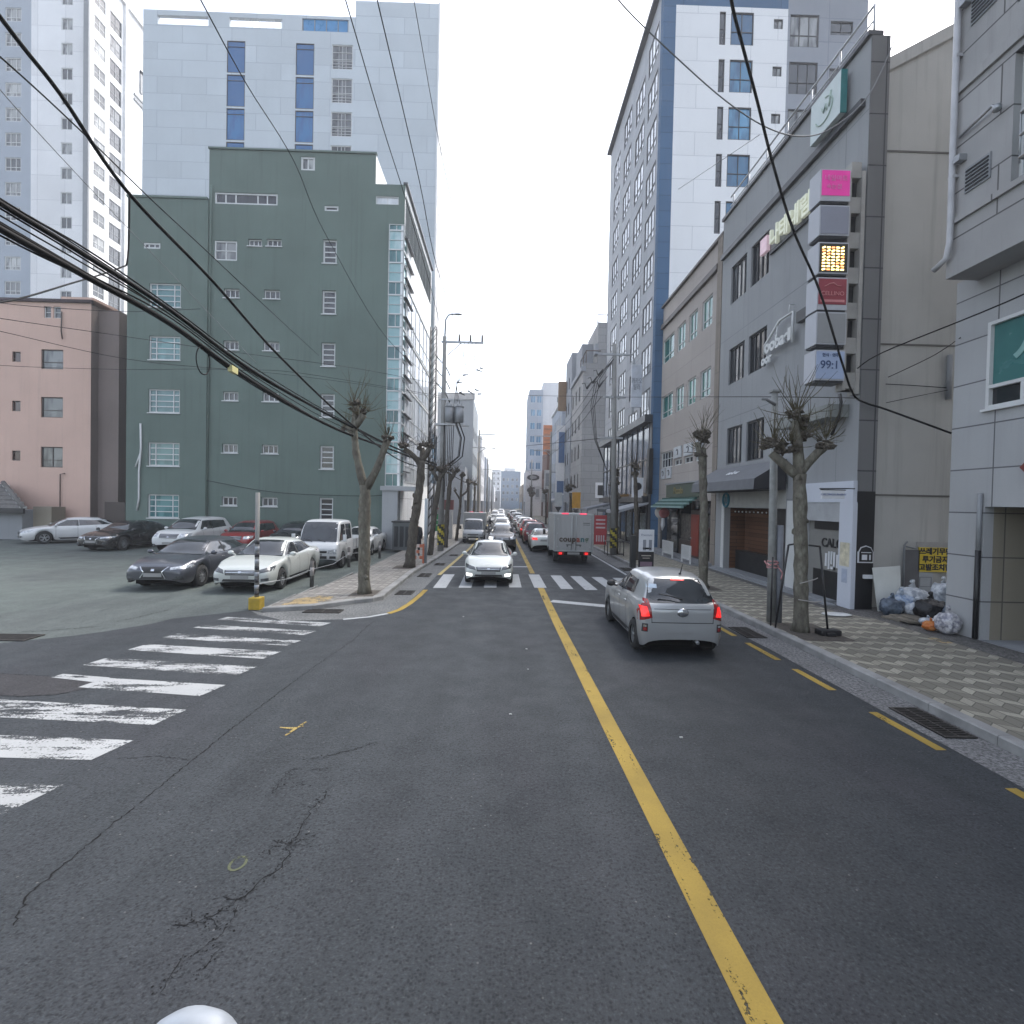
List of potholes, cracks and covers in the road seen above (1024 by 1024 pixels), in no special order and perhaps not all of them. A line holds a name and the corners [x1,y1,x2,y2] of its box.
drain grate [728,627,767,638]
drain grate [889,707,978,739]
crack [151,741,384,995]
